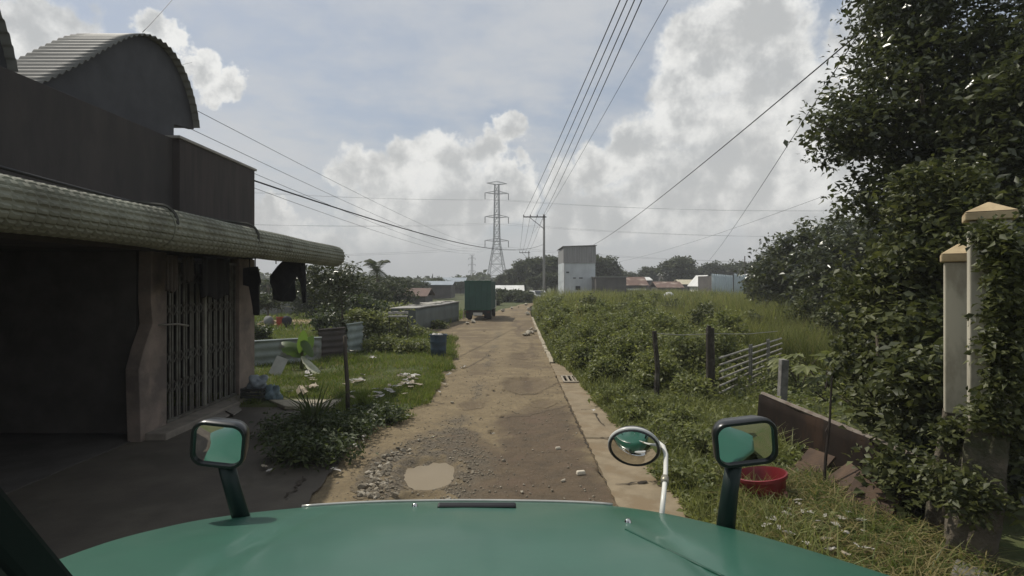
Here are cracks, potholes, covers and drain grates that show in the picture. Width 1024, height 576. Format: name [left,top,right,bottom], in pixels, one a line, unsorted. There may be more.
drain grate [560,375,579,383]
crack [284,476,306,499]
pothole [391,454,468,492]
